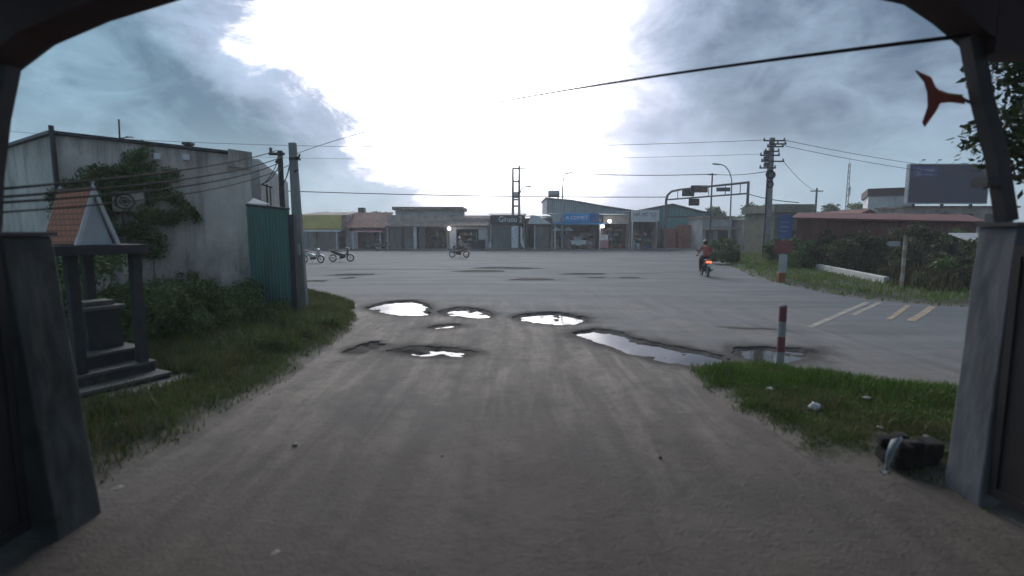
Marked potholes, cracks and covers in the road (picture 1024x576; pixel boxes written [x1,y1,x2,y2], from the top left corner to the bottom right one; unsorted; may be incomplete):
pothole [365,300,433,316]
pothole [512,311,589,325]
pothole [572,328,732,367]
pothole [385,345,477,357]
pothole [342,341,385,354]
pothole [731,346,819,363]
pothole [437,307,493,318]
